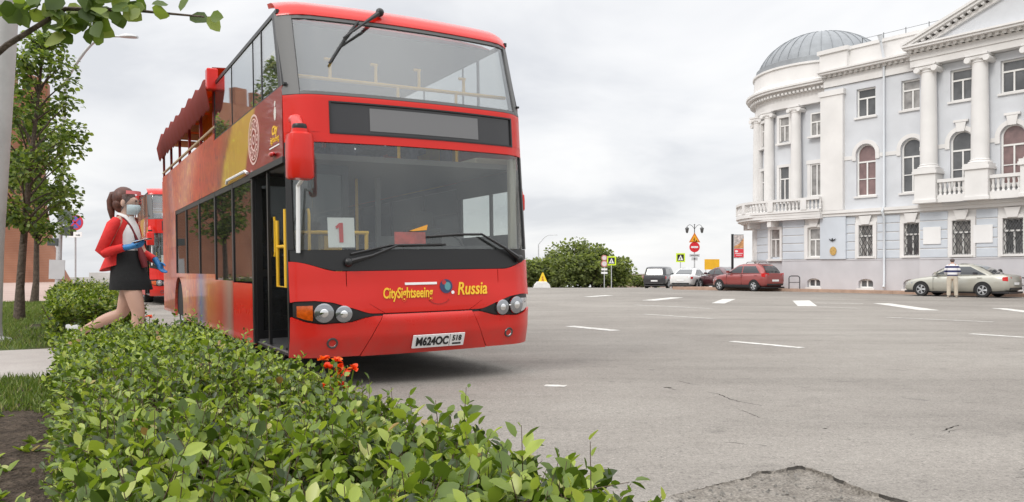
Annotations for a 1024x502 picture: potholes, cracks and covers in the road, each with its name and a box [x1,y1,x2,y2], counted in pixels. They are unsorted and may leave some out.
pothole [654,462,926,502]
